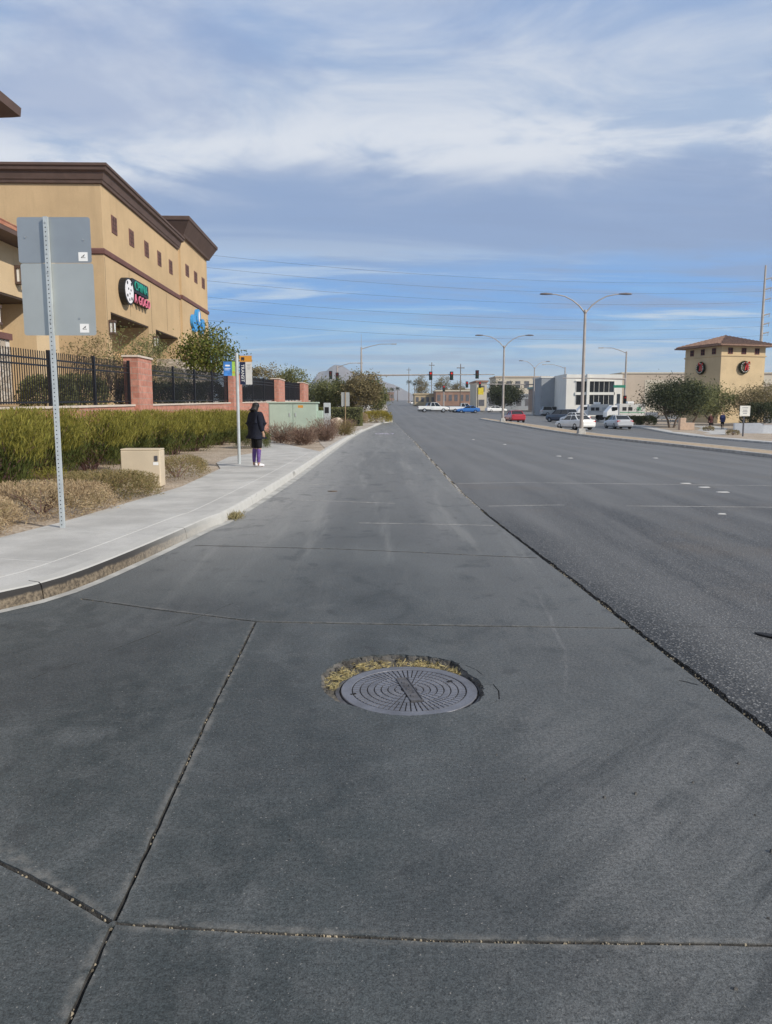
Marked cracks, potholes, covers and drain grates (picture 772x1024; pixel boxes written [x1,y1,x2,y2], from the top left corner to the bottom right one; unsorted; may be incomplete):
manhole cover [335,667,480,716]
